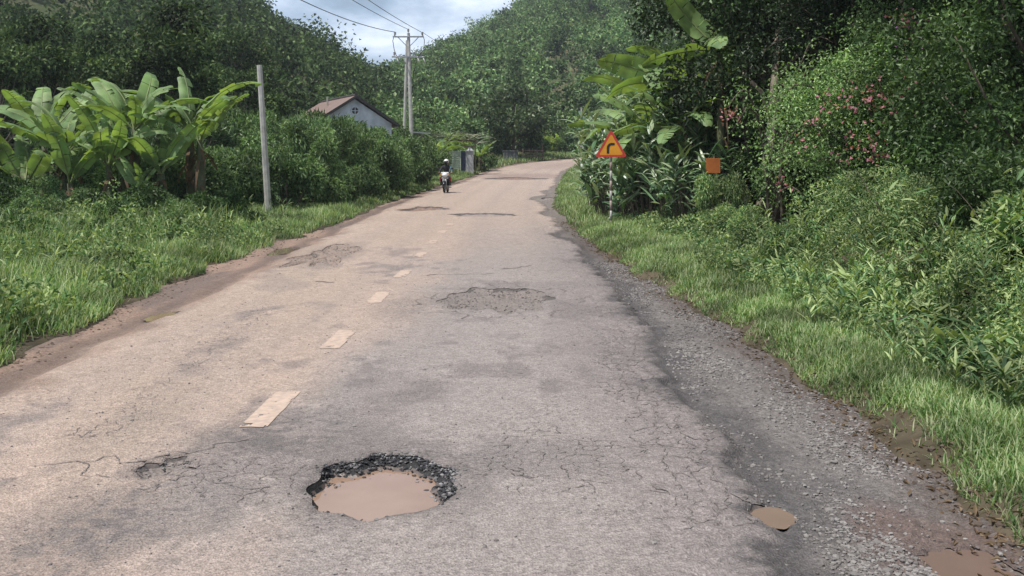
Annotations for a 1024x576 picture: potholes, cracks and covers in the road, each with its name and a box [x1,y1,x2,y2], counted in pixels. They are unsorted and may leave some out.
pothole [747,503,799,532]
crack [581,307,754,529]
pothole [436,287,556,315]
pothole [135,456,196,480]
pothole [306,450,466,521]
crack [34,439,307,501]
crack [462,426,646,494]
pothole [273,243,362,269]
